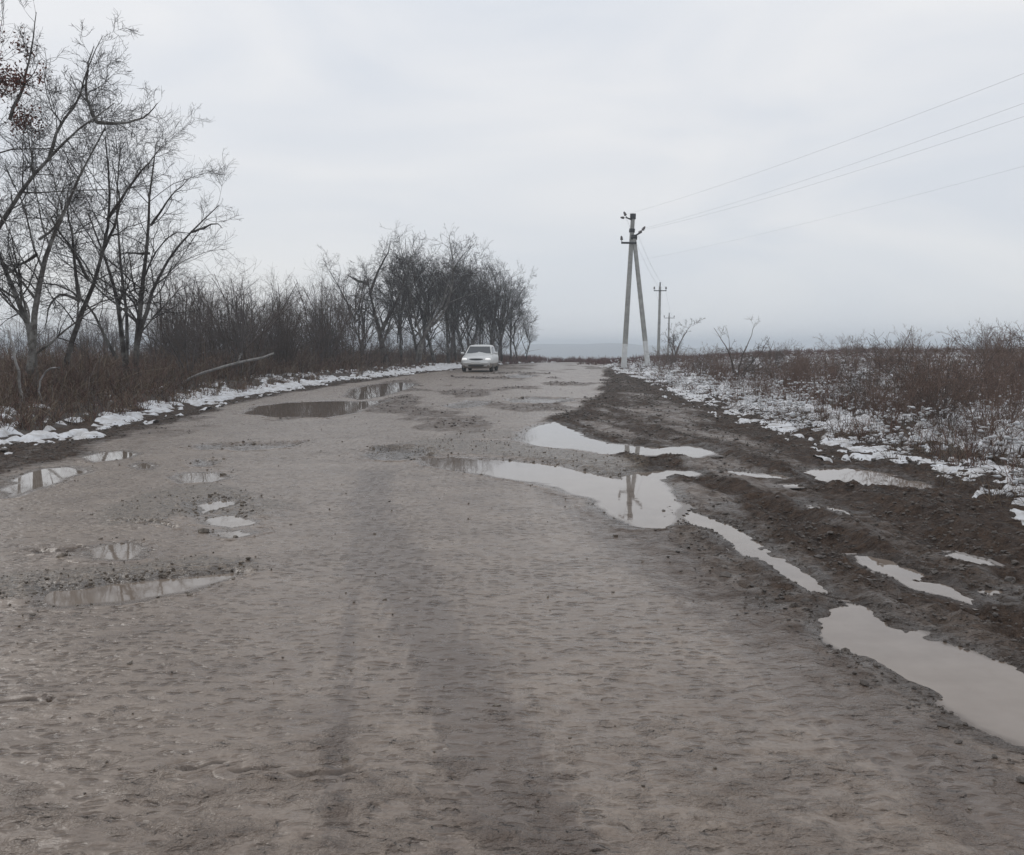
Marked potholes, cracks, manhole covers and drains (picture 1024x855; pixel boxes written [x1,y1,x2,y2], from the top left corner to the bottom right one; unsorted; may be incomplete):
pothole [168,492,277,540]
pothole [1,557,272,616]
pothole [407,452,723,532]
